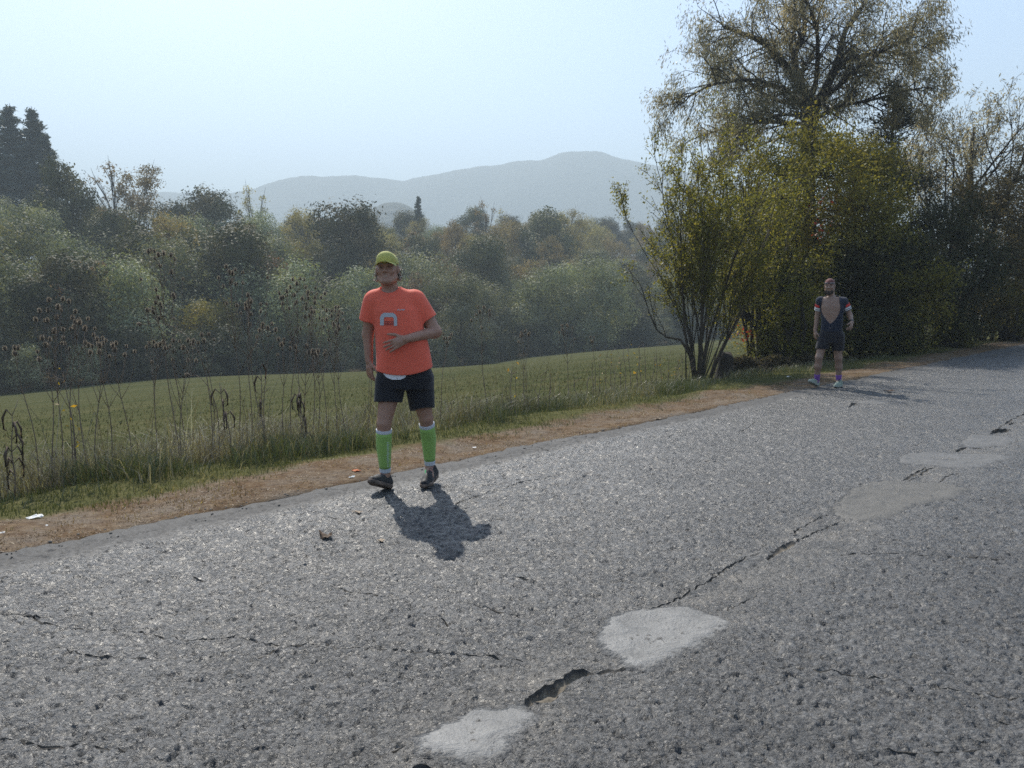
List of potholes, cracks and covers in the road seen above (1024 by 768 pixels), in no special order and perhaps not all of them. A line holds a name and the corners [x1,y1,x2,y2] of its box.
crack [0,738,125,752]
pothole [524,668,593,707]
crack [3,613,523,662]
